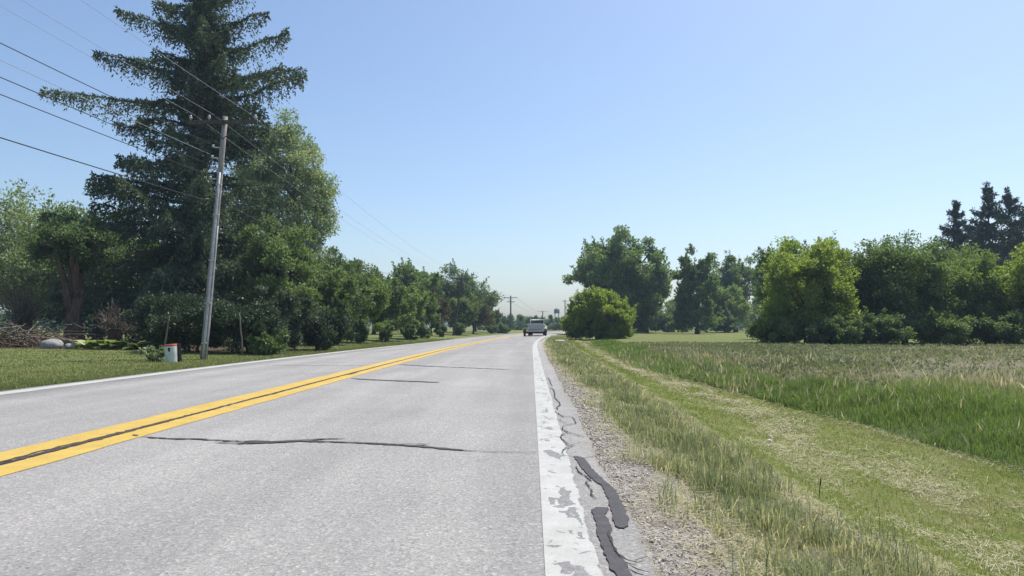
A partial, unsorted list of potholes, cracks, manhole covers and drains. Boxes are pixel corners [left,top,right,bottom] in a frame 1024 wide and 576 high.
crack [548,378,606,497]
